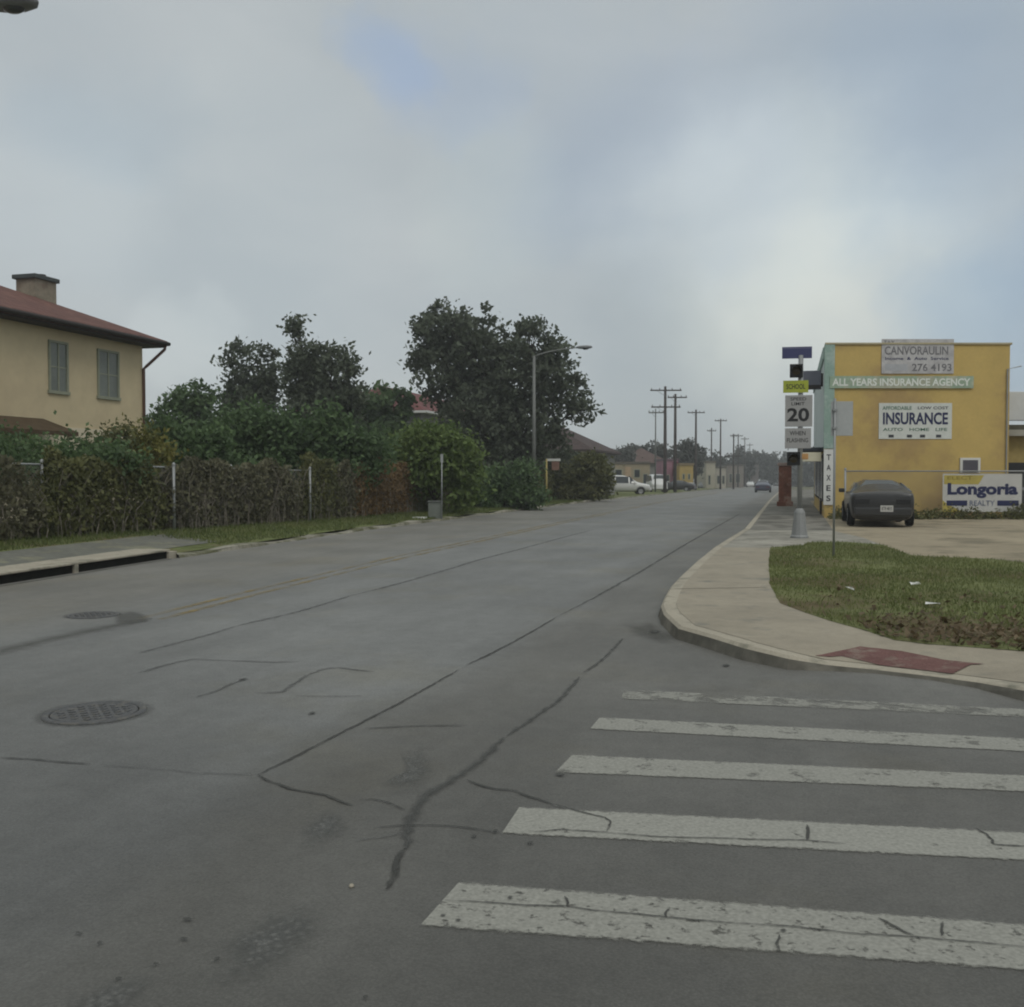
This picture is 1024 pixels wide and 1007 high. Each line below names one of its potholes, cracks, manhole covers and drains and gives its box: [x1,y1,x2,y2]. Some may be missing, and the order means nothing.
manhole cover [66,611,119,619]
manhole cover [40,700,147,725]
crack [508,638,623,735]
crack [976,828,1024,846]
drain grate [0,549,177,586]
crack [112,617,556,889]
